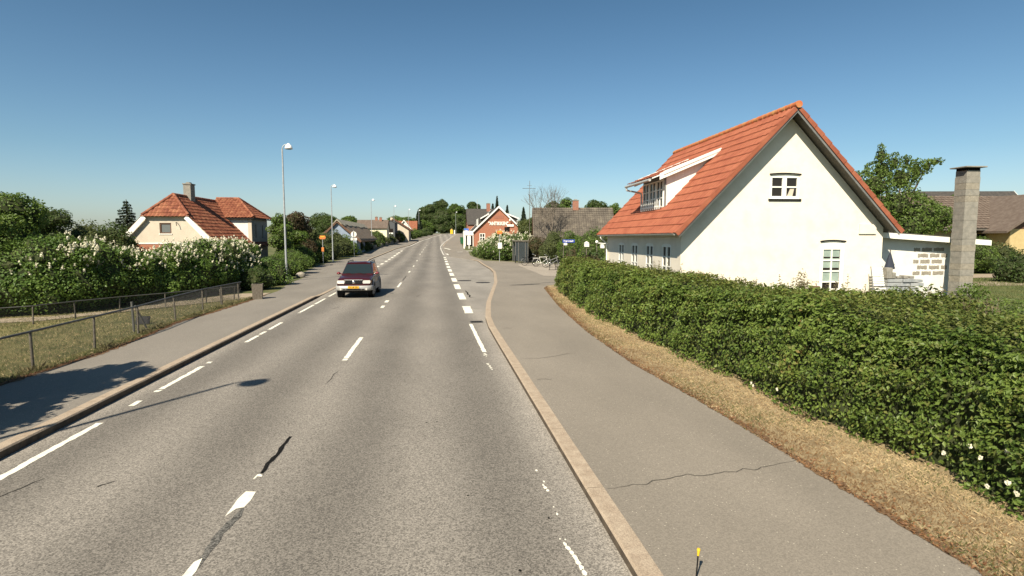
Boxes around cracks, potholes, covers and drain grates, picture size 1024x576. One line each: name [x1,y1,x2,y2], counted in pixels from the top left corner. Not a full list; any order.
crack [608,461,791,489]
